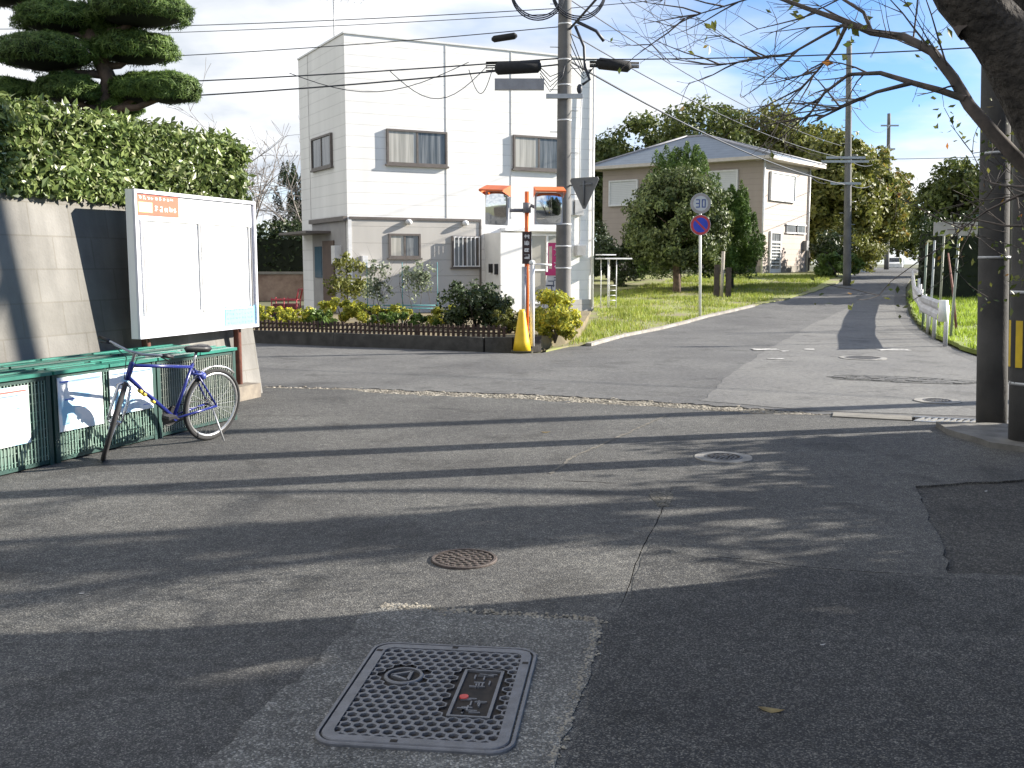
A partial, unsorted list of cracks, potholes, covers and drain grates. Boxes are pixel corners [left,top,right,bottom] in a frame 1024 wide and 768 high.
manhole cover [314,642,537,756]
manhole cover [431,548,497,570]
manhole cover [694,451,753,463]
crack [620,486,673,606]
